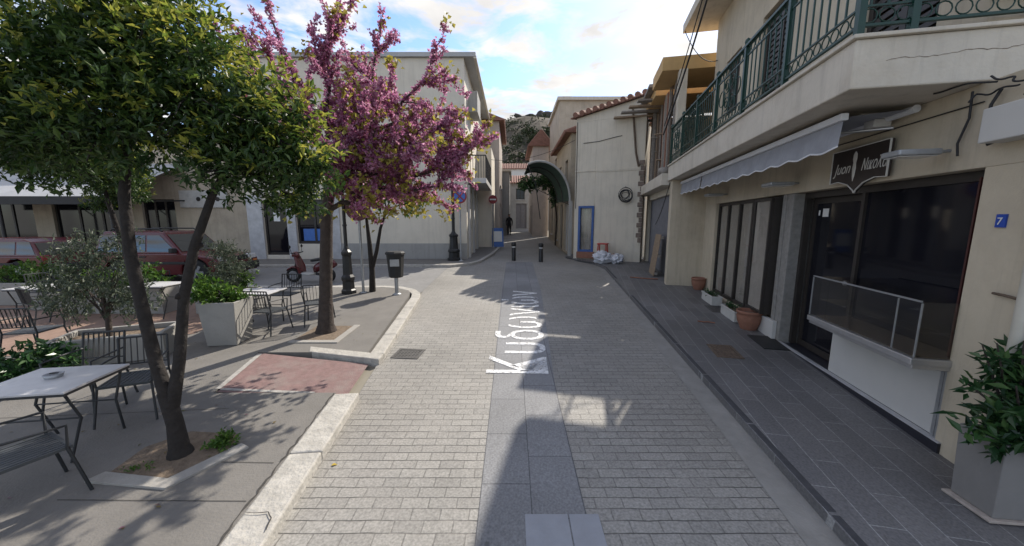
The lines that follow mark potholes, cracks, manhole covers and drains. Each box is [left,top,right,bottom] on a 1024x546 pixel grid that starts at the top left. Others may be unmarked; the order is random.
manhole cover [706,344,745,359]
